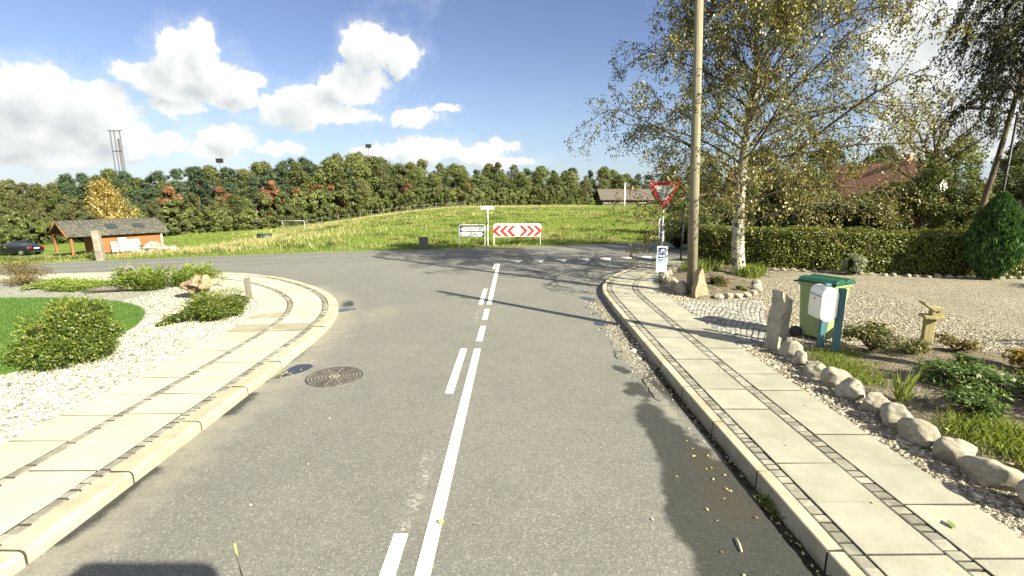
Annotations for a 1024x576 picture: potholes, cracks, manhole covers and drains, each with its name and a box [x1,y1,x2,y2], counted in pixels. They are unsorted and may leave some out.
manhole cover [305,367,364,387]
